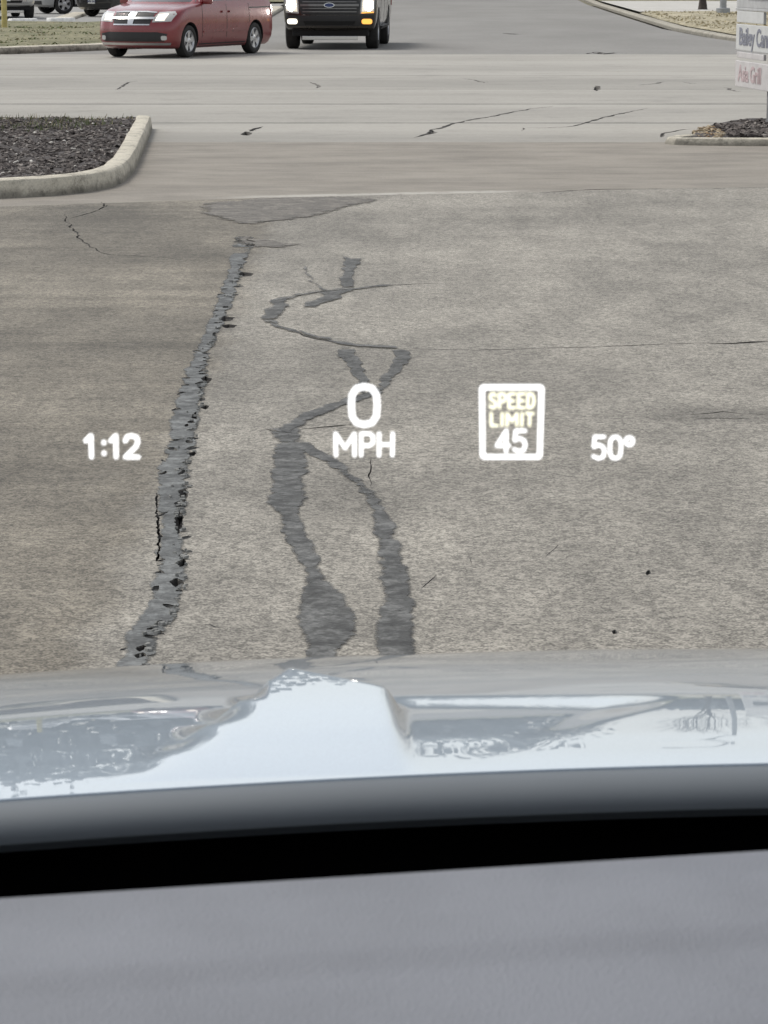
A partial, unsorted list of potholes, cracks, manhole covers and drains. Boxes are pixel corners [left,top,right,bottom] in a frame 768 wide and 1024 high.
crack [690,388,766,419]
crack [64,202,222,263]
crack [418,106,642,137]
crack [410,341,768,350]
